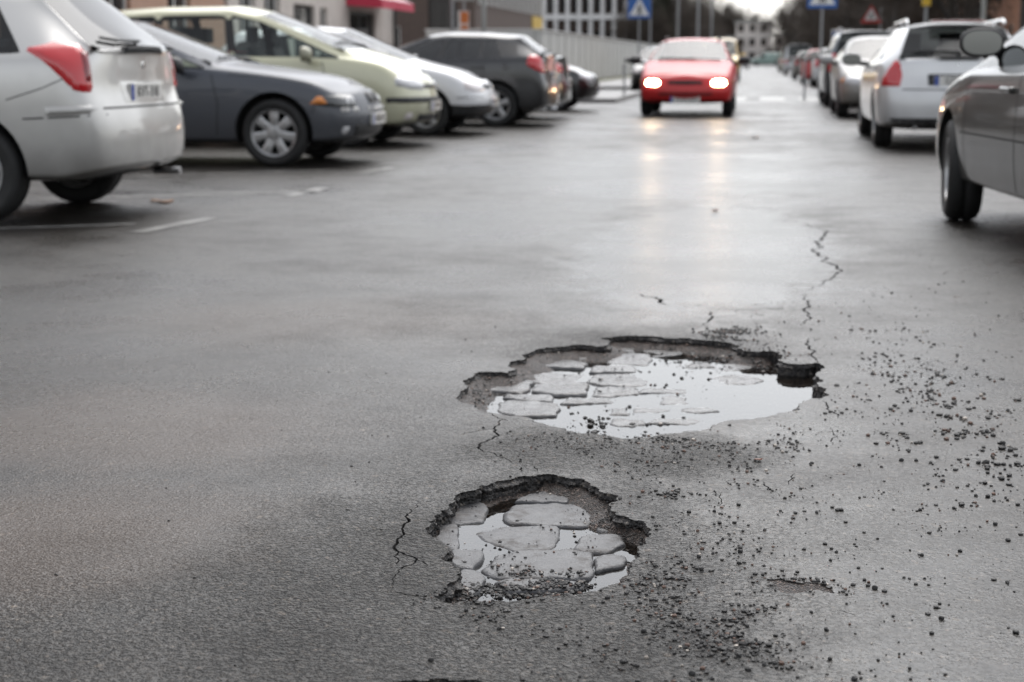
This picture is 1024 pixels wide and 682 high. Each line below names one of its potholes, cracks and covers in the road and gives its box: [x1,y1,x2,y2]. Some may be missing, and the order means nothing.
pothole [425,474,652,603]
crack [640,294,778,327]
crack [794,221,843,367]
crack [462,411,538,471]
crack [391,503,427,596]
pothole [456,336,830,439]
